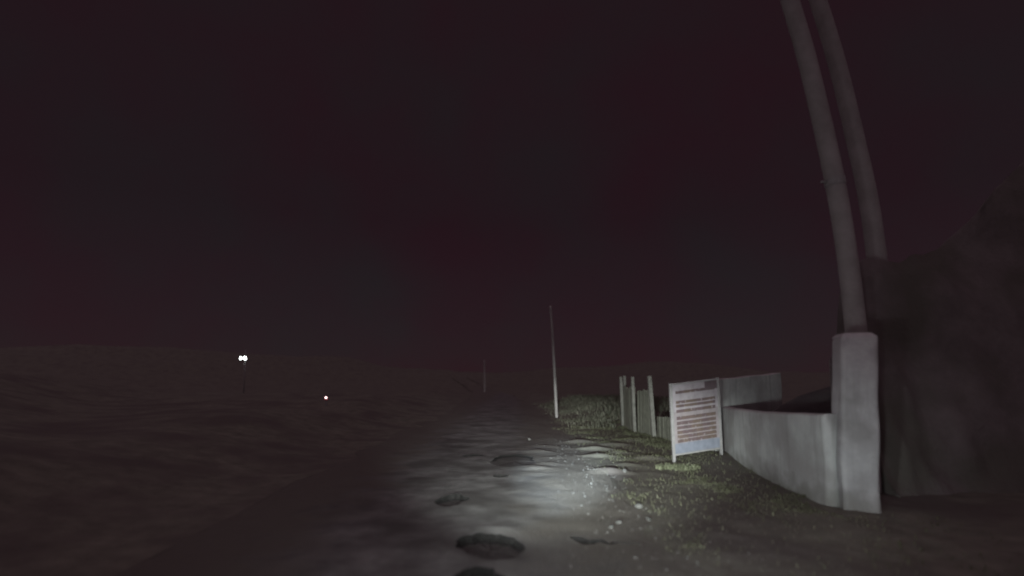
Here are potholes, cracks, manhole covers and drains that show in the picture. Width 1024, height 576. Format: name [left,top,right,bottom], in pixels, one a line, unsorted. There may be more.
pothole [434,493,470,507]
pothole [455,532,527,561]
pothole [490,454,537,467]
pothole [454,566,505,576]
